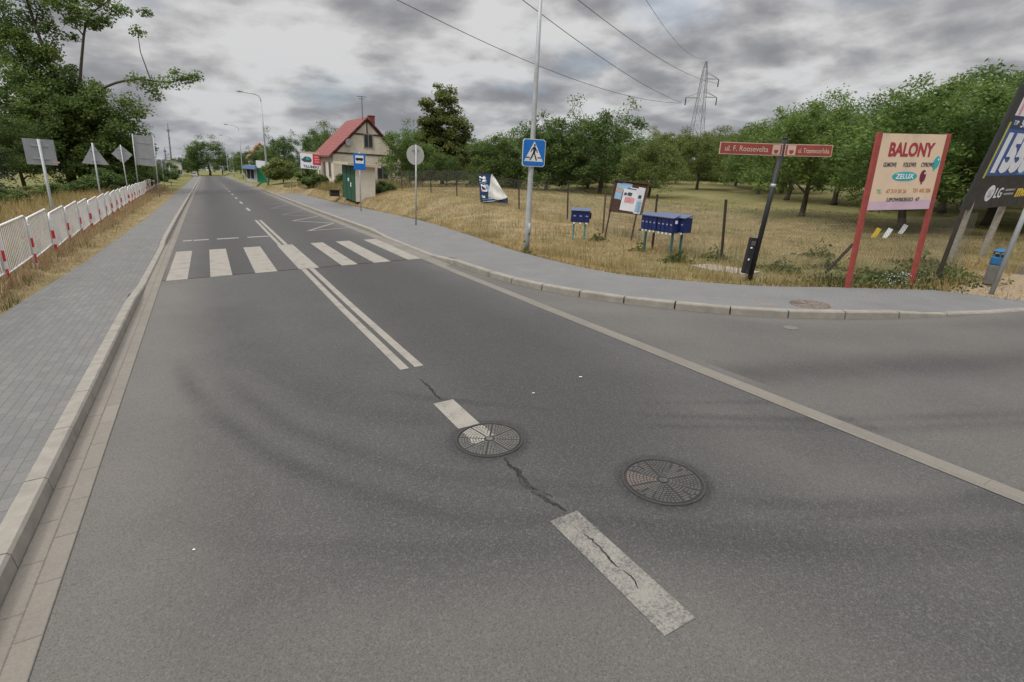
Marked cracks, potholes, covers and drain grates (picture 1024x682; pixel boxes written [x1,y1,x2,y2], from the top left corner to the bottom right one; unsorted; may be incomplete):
manhole cover [621,458,706,506]
manhole cover [788,299,832,309]
manhole cover [455,423,524,457]
crack [505,457,566,511]
crack [584,534,638,587]
